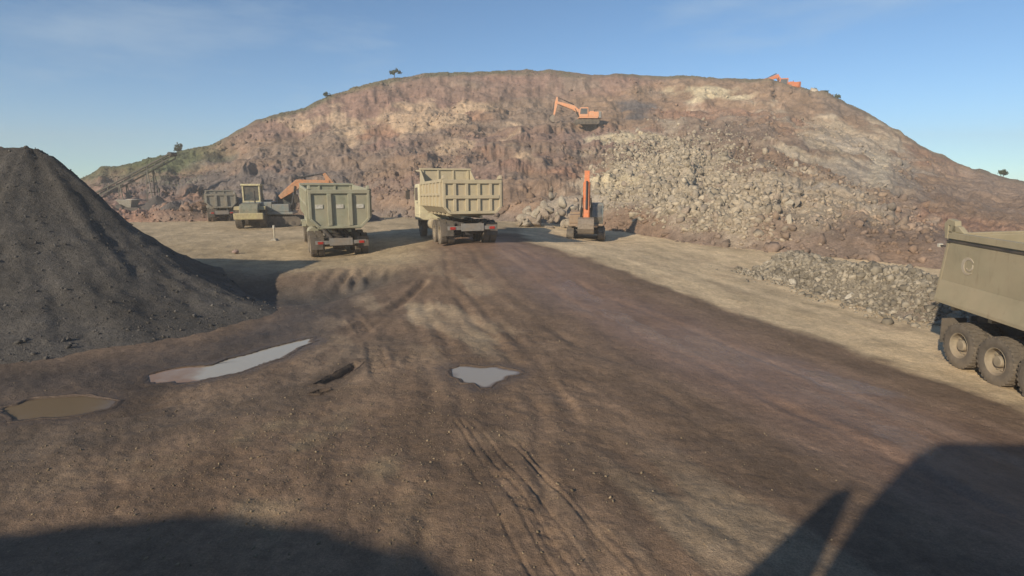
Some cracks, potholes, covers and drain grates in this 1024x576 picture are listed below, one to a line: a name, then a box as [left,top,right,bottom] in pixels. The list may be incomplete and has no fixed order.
pothole [308,360,365,387]
pothole [445,364,527,389]
